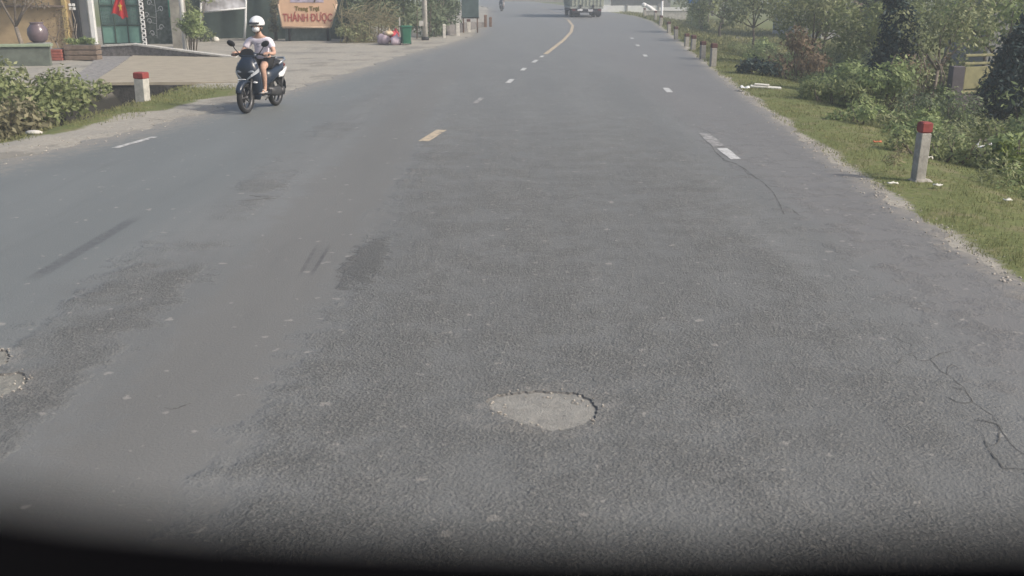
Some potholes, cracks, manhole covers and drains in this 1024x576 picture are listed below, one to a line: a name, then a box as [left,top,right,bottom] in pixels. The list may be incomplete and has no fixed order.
pothole [486,388,604,432]
crack [697,127,799,215]
crack [895,337,1024,469]
pothole [0,348,12,366]
pothole [0,369,33,398]
